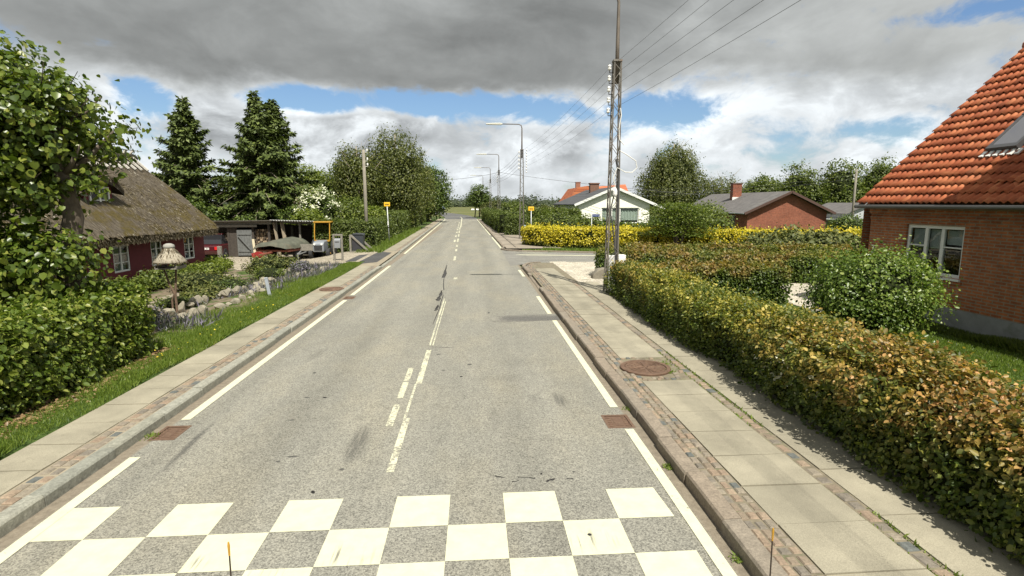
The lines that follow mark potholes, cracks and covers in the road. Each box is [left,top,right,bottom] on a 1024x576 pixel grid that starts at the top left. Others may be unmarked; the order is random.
manhole cover [620,360,671,377]
